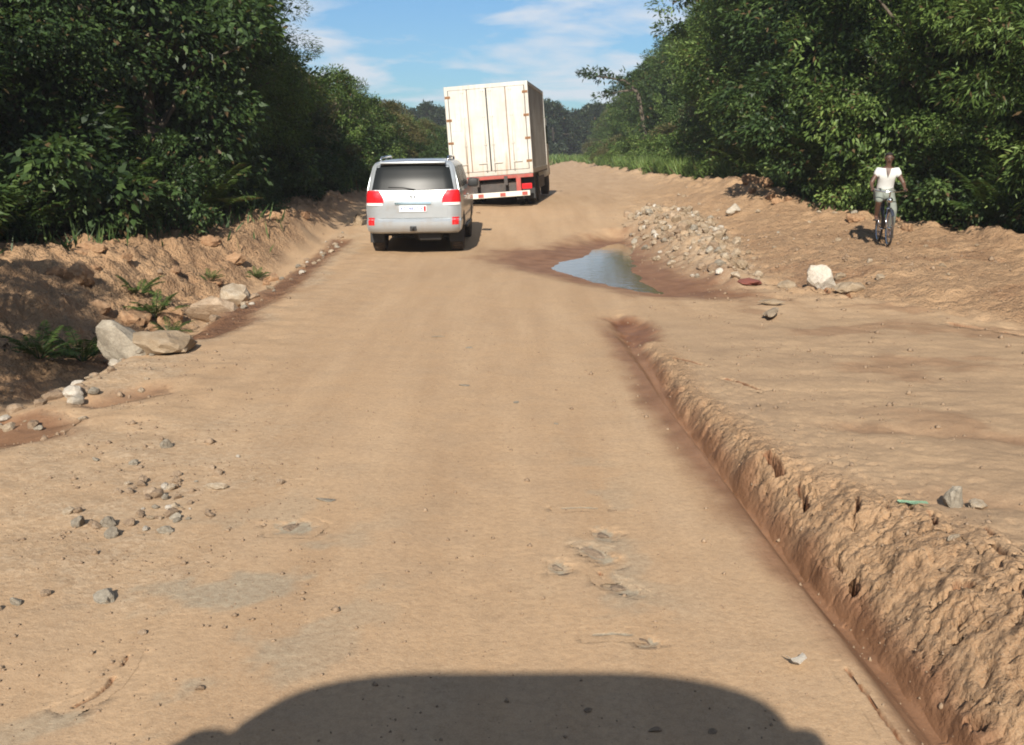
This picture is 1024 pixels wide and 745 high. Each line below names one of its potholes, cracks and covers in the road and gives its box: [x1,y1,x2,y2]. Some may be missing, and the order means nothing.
pothole [585,524,624,544]
pothole [591,576,658,600]
pothole [570,537,627,571]
pothole [543,555,574,579]
pothole [635,633,662,654]
